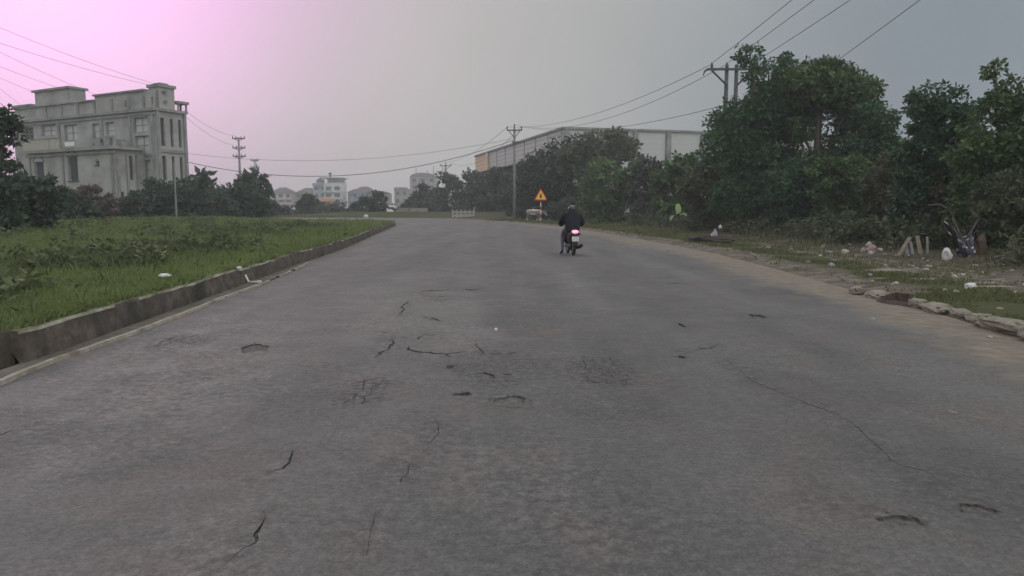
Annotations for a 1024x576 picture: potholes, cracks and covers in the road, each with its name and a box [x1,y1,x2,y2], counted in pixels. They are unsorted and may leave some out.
crack [228,514,266,562]
pothole [236,342,273,353]
crack [264,451,293,474]
crack [582,357,634,386]
pothole [957,503,1000,514]
pothole [874,511,925,527]
pothole [489,395,531,403]
crack [374,289,516,358]
